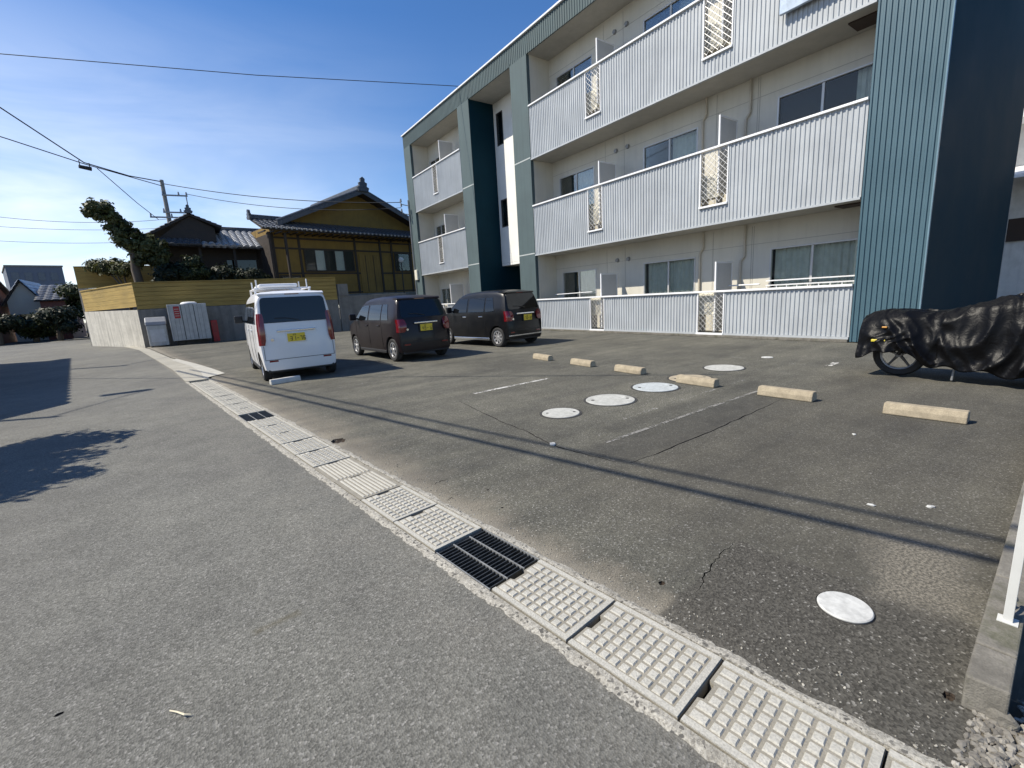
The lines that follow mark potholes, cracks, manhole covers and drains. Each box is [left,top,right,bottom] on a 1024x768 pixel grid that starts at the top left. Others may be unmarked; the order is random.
manhole cover [583,394,638,406]
manhole cover [539,408,582,419]
manhole cover [815,591,876,625]
drain grate [238,411,275,422]
manhole cover [631,382,681,392]
crack [696,541,735,592]
drain grate [436,529,540,592]
